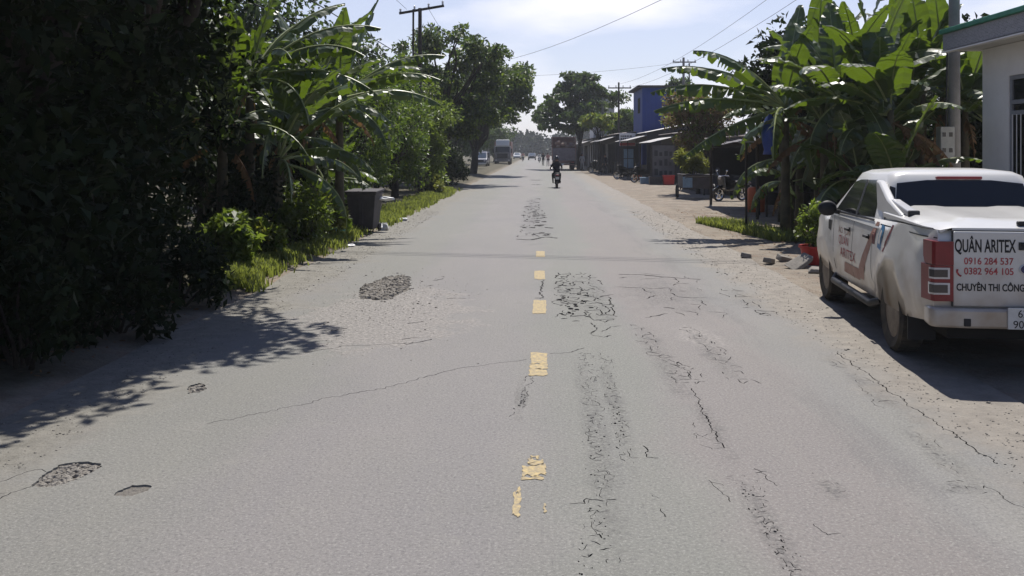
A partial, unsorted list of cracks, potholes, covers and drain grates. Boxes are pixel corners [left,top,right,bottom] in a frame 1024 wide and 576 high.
pothole [187,383,207,394]
crack [207,359,534,424]
crack [539,273,777,449]
crack [571,353,653,575]
crack [709,468,801,576]
pothole [359,275,414,300]
crack [831,354,1024,508]
pothole [31,461,102,487]
pothole [114,484,152,497]
